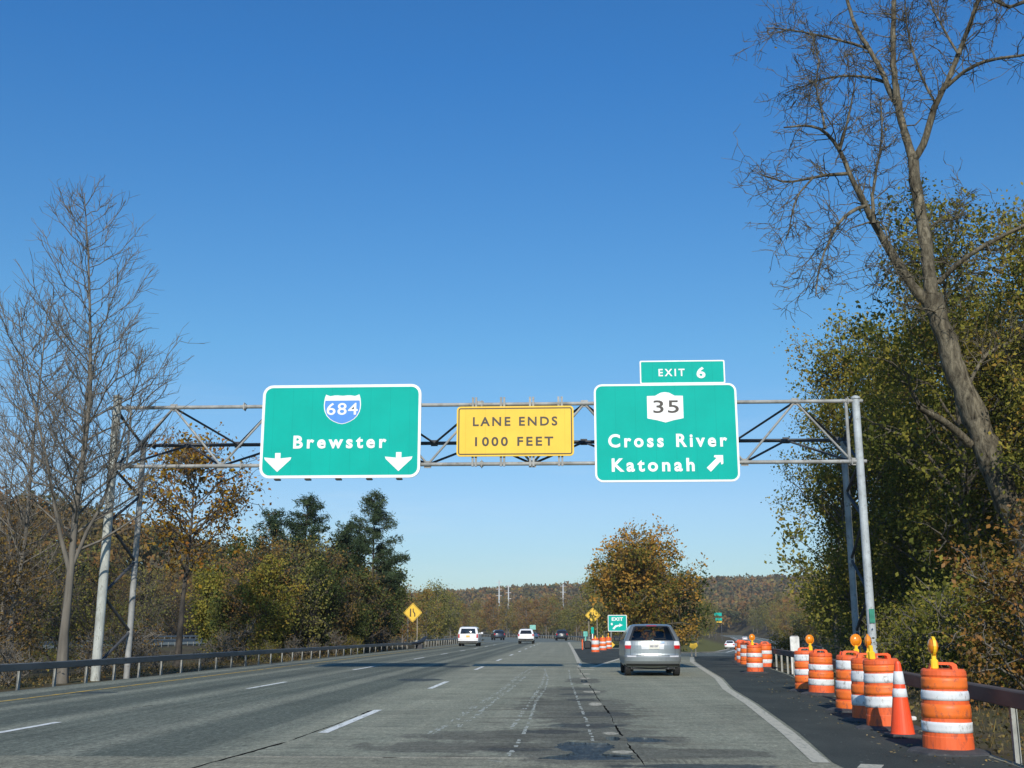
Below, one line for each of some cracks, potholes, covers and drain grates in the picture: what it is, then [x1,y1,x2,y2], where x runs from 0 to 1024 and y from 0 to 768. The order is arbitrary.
crack [578,668,645,766]
